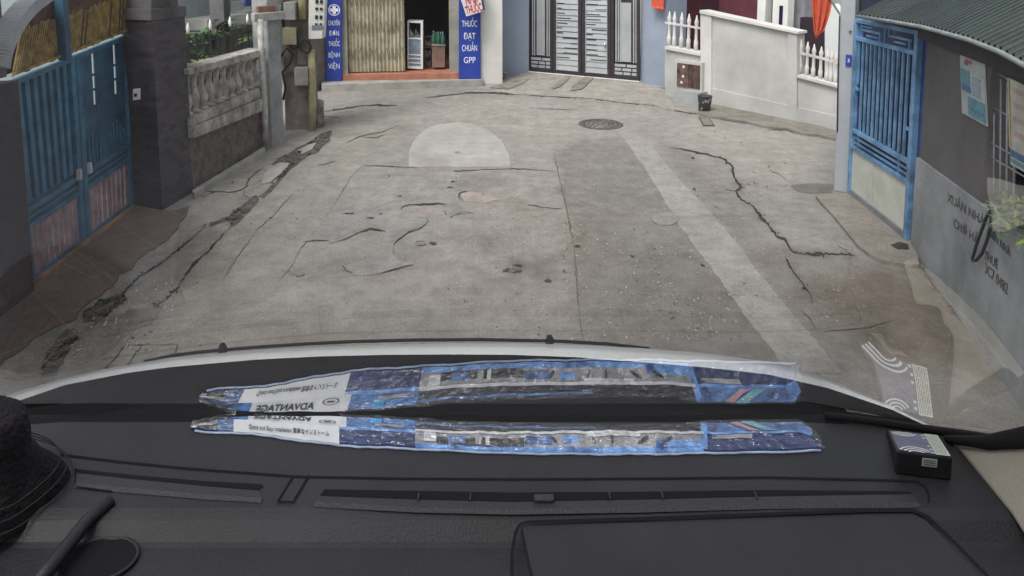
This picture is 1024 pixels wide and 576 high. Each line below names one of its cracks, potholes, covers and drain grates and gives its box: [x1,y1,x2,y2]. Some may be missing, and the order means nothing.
pothole [101,294,128,303]
manhole cover [578,119,623,130]
drain grate [699,117,715,126]
crack [203,167,264,199]
crack [676,148,855,319]
crack [283,161,471,276]
crack [117,195,291,307]
